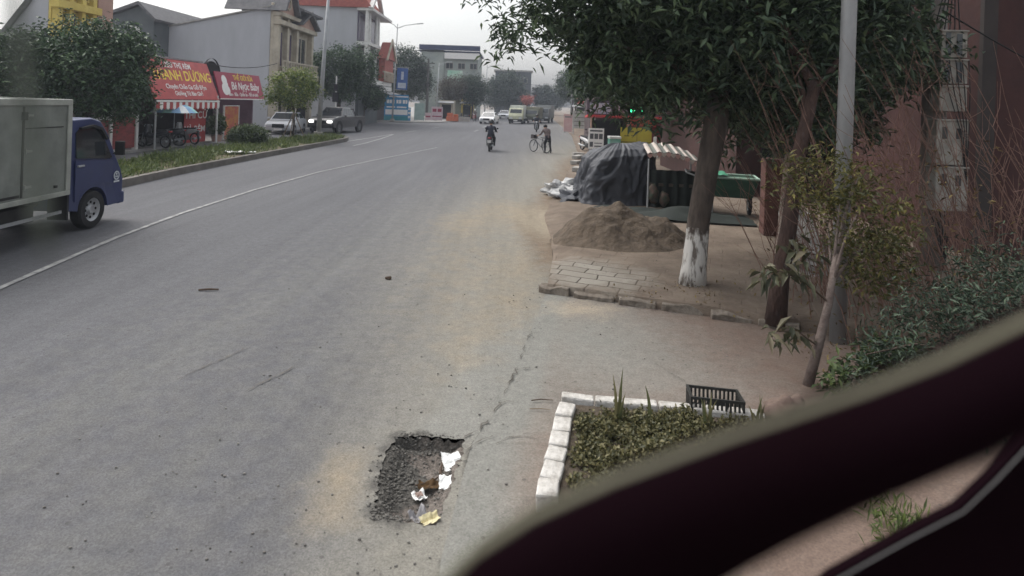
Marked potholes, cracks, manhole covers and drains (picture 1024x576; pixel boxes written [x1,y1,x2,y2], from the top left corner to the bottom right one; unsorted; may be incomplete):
pothole [359,432,465,525]
crack [464,331,537,450]
